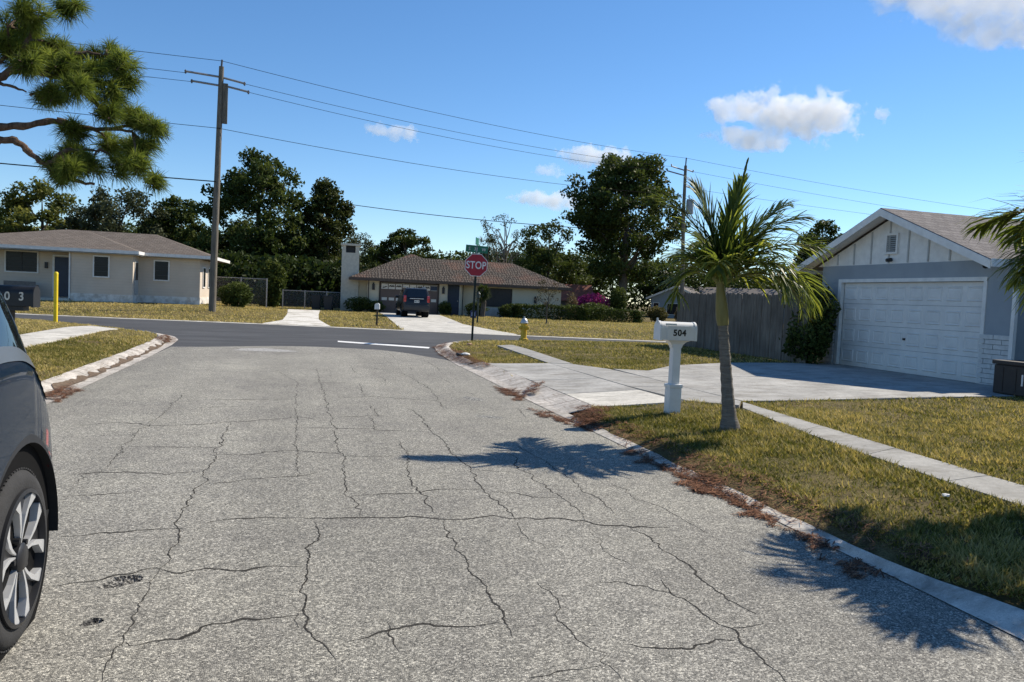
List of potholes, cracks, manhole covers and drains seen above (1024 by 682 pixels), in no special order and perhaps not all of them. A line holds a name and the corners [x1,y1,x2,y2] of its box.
crack [63,356,785,681]
pothole [99,574,144,589]
pothole [79,618,104,627]
